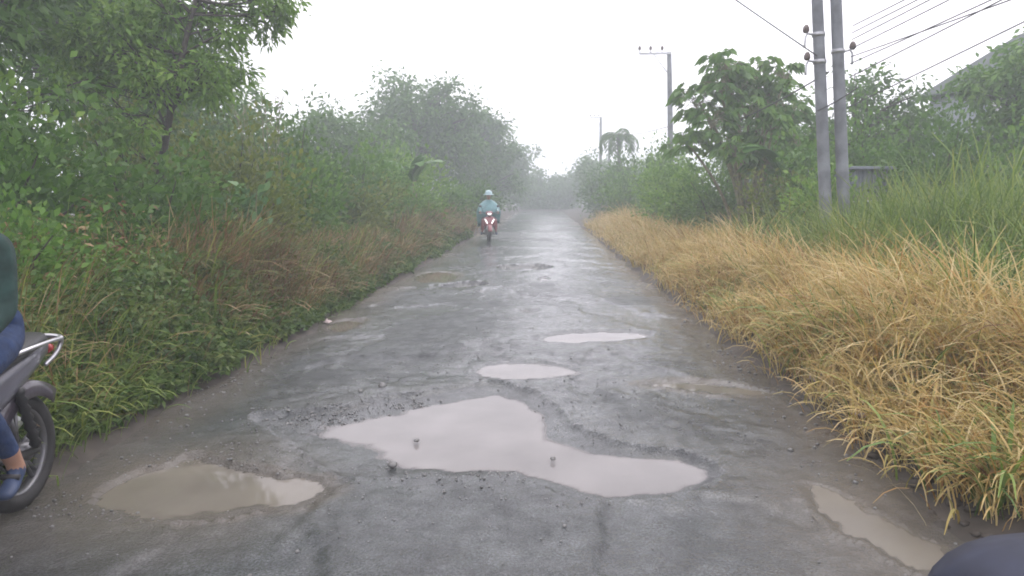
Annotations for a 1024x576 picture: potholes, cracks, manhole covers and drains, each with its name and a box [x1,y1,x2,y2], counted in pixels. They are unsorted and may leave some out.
pothole [465,359,587,381]
pothole [529,328,655,343]
pothole [795,479,951,576]
pothole [412,271,461,283]
pothole [87,452,337,524]
pothole [637,377,782,398]
pothole [247,380,724,503]
pothole [496,263,553,271]
